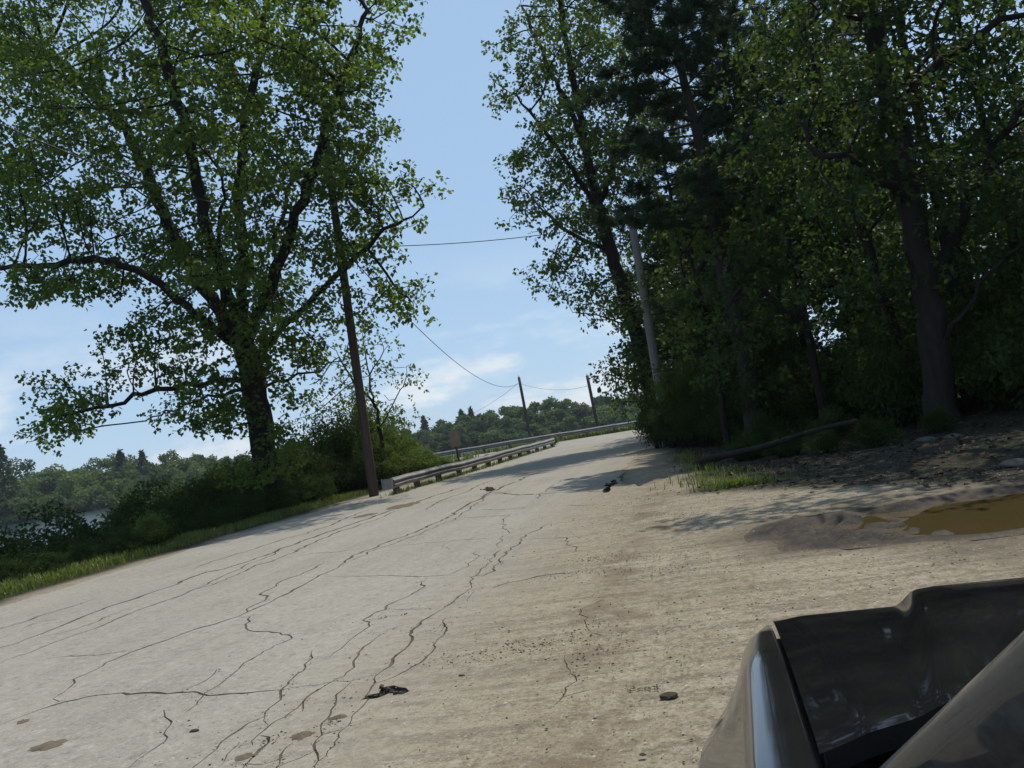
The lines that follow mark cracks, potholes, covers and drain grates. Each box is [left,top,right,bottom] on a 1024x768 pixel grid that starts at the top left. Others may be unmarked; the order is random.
pothole [743,481,1024,552]
crack [1,469,601,768]
